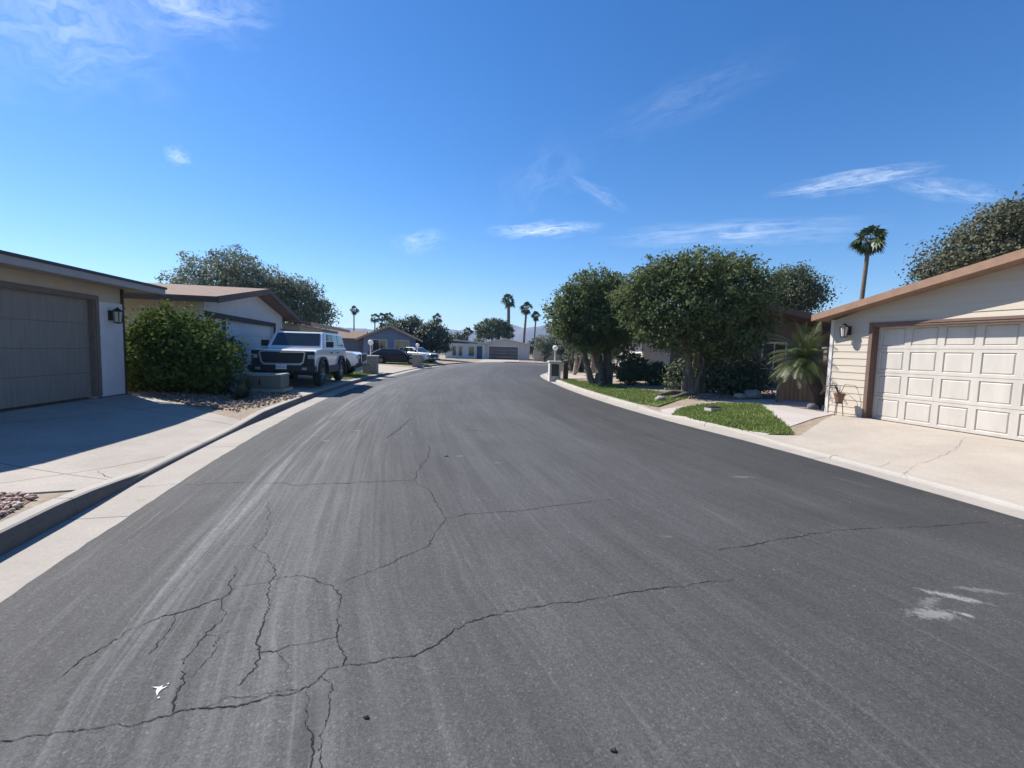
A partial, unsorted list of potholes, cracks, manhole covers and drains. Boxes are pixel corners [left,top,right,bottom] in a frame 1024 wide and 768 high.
crack [720,521,989,550]
